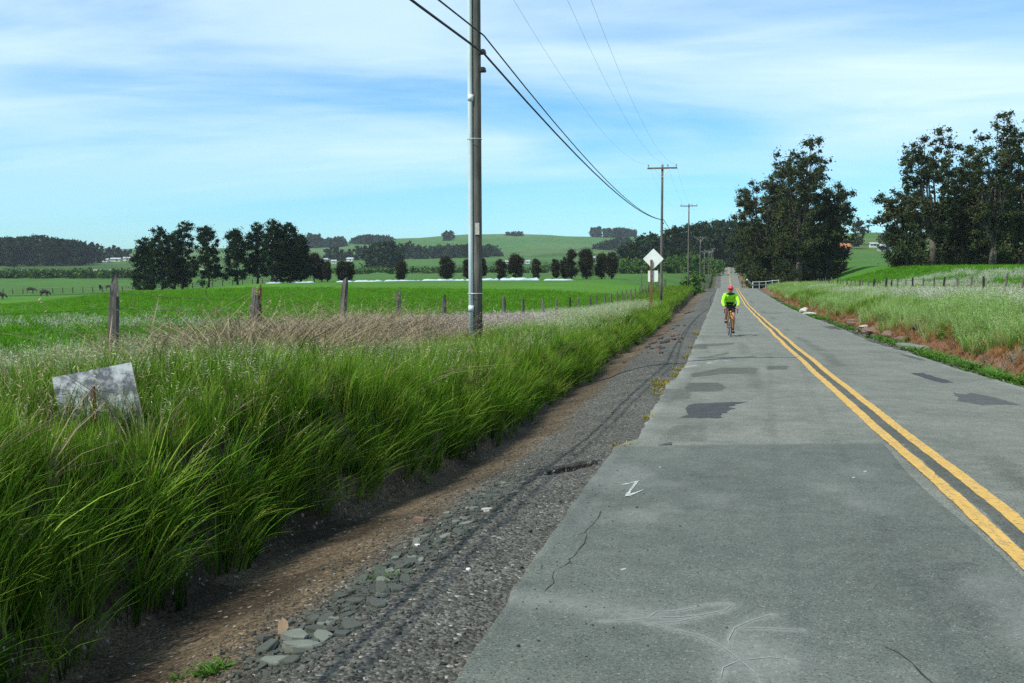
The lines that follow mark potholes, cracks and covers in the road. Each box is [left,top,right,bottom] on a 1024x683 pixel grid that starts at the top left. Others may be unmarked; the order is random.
pothole [527,460,604,478]
crack [629,603,793,683]
crack [546,511,601,589]
crack [881,644,933,683]
